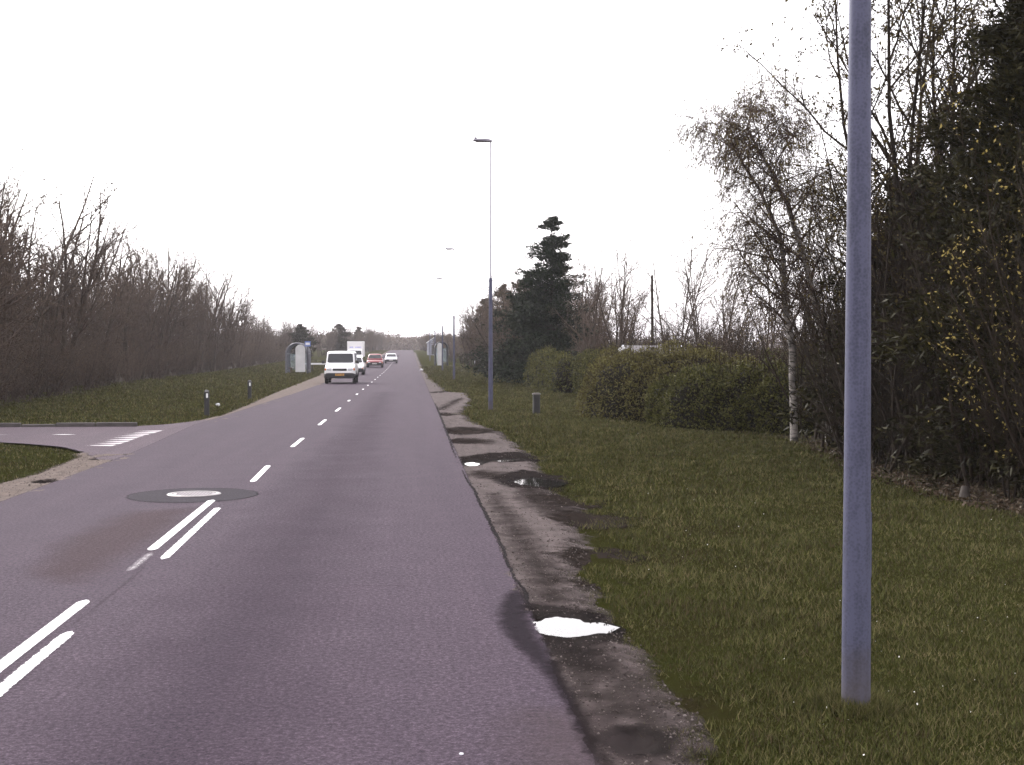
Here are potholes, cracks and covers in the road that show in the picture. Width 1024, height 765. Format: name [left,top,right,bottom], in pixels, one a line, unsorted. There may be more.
pothole [594,724,671,756]
pothole [532,612,621,638]
